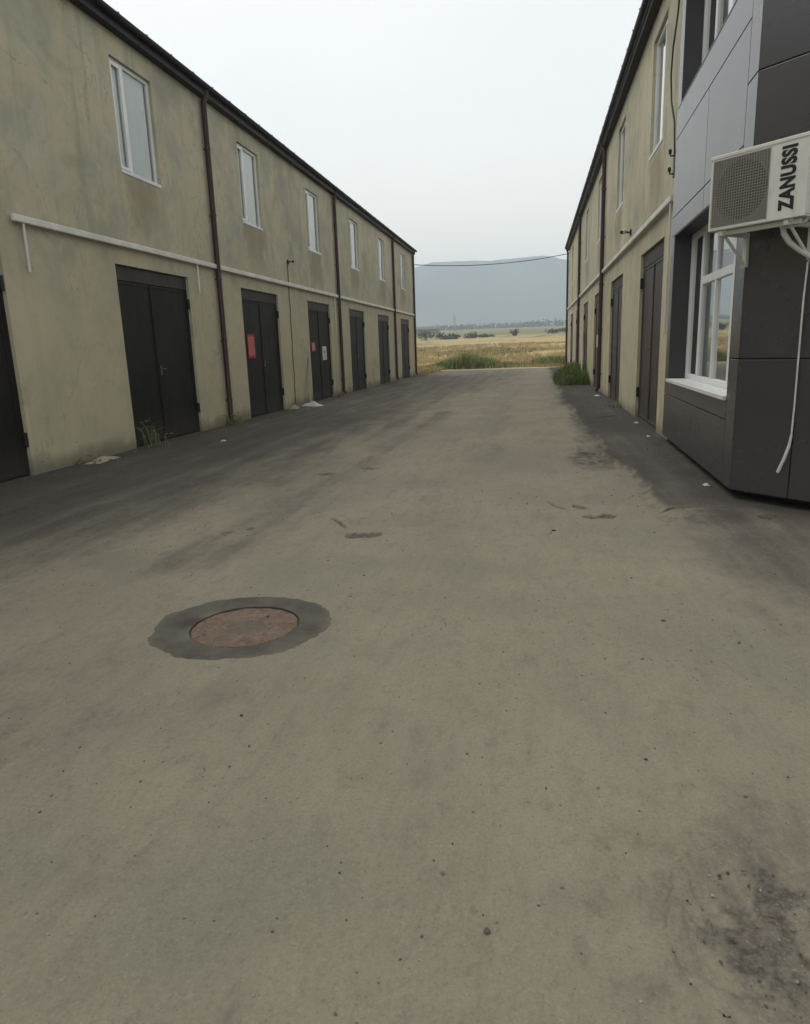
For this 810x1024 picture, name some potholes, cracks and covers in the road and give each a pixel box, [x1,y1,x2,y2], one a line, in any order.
pothole [576,511,623,521]
manhole cover [147,597,332,660]
pothole [337,529,389,542]
pothole [541,501,593,512]
